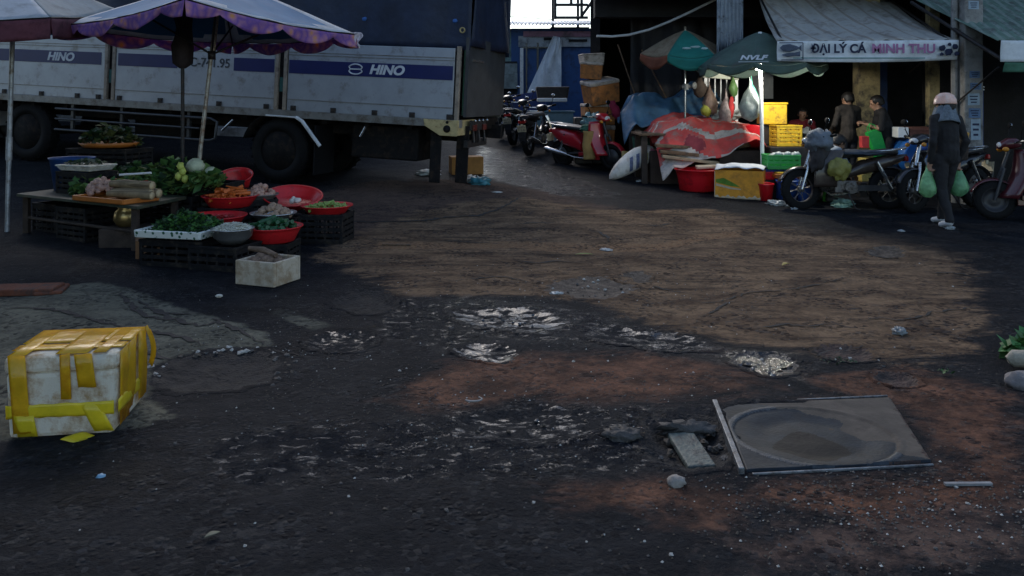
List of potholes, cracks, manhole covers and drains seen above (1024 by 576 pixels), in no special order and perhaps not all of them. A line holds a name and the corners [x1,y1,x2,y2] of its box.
pothole [447,341,524,367]
pothole [298,326,383,355]
manhole cover [712,395,934,475]
pothole [719,348,806,379]
pothole [807,341,881,364]
pothole [571,320,726,354]
pothole [441,304,578,336]
pothole [867,369,927,390]
